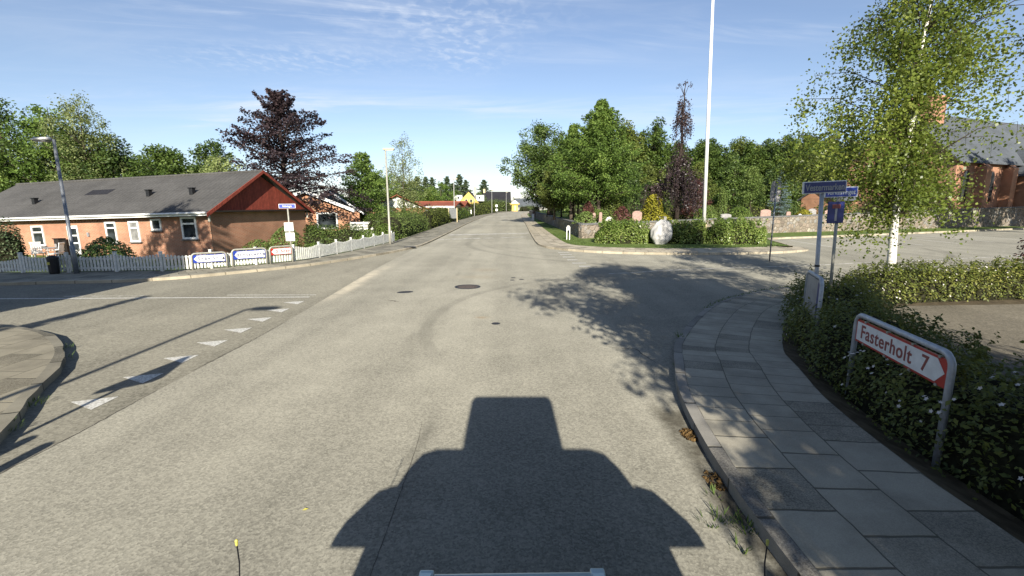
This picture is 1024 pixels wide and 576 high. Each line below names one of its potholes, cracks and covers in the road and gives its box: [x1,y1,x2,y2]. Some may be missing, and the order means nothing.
crack [370,424,422,576]
